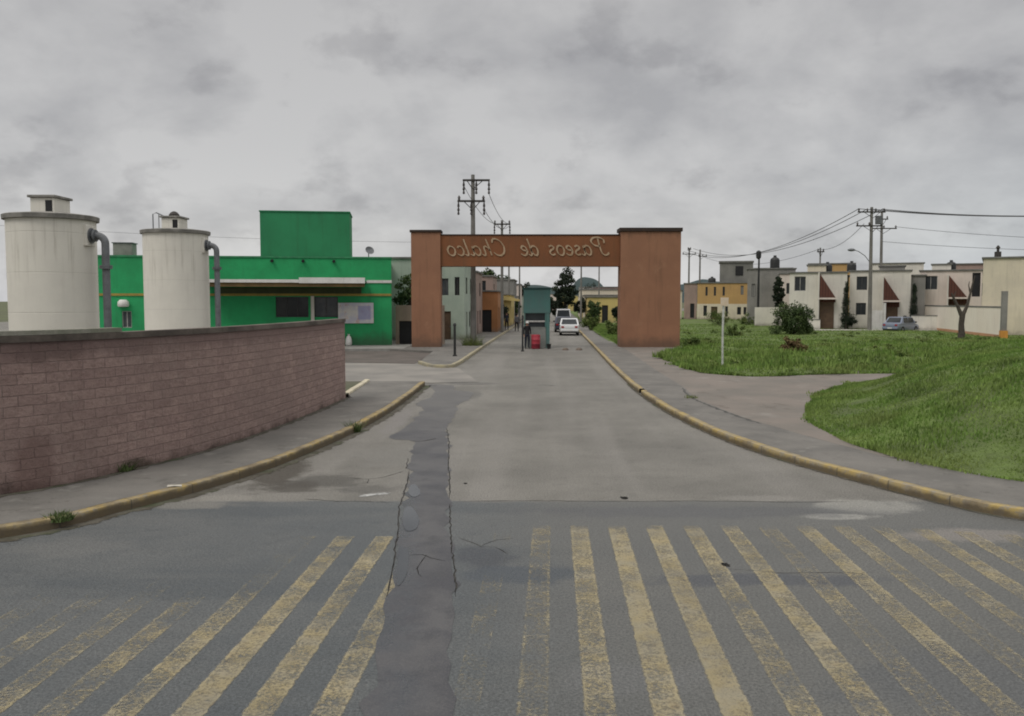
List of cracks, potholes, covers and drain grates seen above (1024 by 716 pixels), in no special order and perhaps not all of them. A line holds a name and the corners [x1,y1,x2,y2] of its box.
crack [356,430,511,597]
